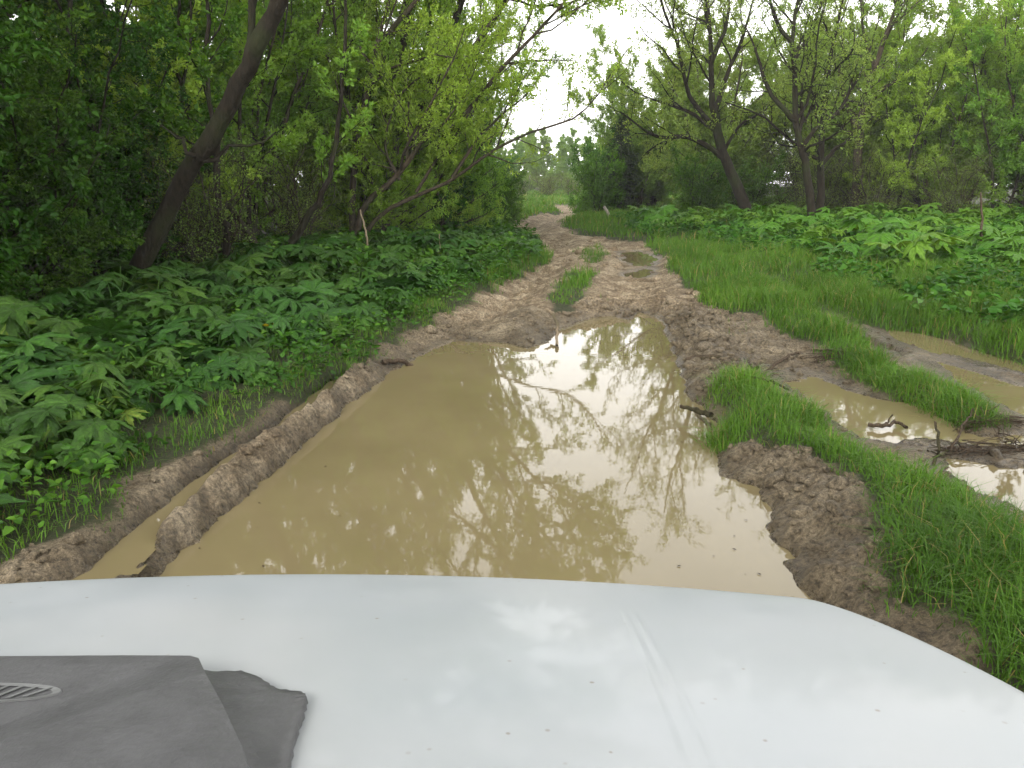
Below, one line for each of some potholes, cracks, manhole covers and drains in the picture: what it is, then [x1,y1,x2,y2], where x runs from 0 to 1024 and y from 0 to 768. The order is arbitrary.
pothole [604,248,674,268]
pothole [59,299,1024,692]
